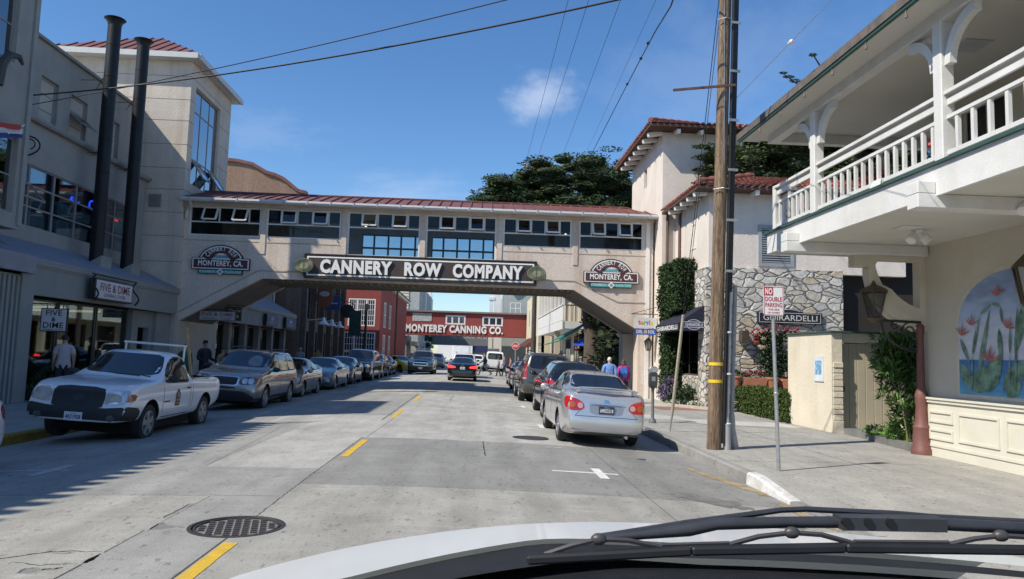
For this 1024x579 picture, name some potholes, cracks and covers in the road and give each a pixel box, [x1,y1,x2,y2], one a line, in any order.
crack [0,550,102,566]
manhole cover [186,516,286,538]
